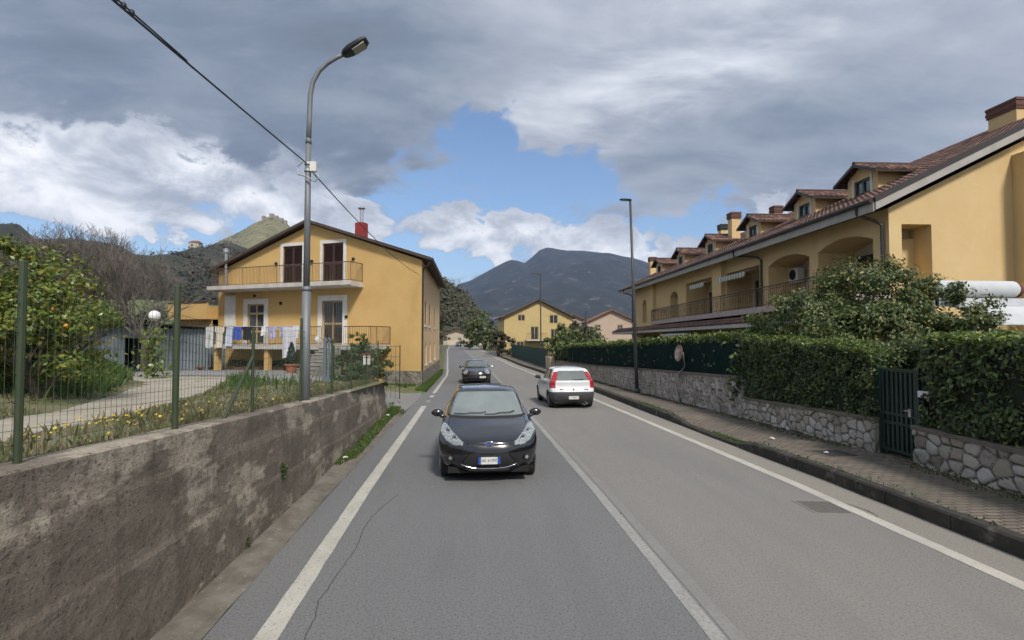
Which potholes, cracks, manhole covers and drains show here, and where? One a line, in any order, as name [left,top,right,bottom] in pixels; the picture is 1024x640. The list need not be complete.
drain grate [792,500,856,515]
crack [304,495,398,640]
